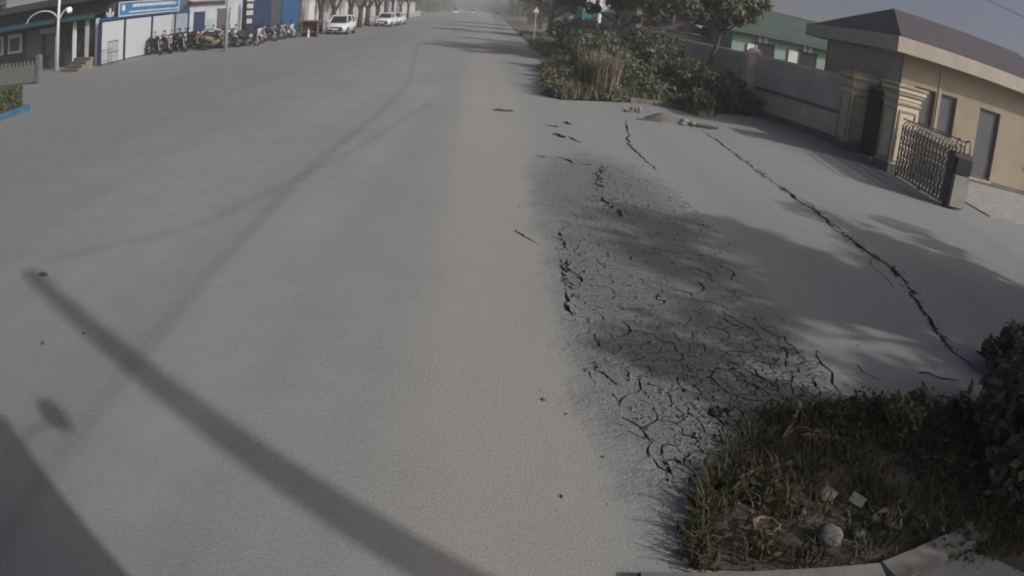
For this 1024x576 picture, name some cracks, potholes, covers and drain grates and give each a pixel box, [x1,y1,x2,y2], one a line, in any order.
crack [625,120,657,171]
crack [703,131,978,372]
crack [535,136,881,486]
